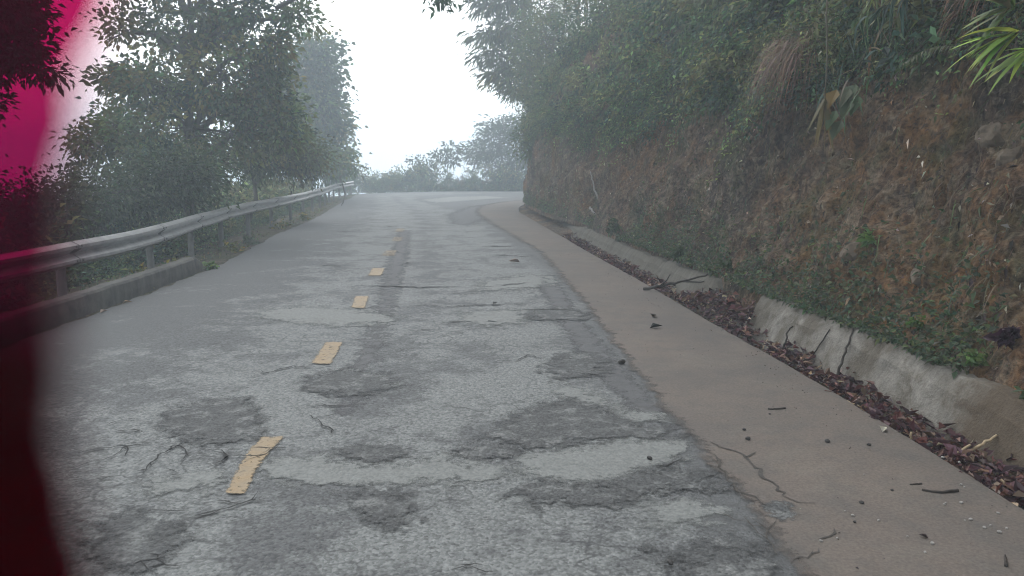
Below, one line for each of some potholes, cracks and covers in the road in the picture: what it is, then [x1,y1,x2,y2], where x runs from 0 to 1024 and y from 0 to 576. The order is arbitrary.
crack [76,418,189,482]
crack [311,403,344,433]
crack [705,451,837,560]
crack [370,285,574,322]
